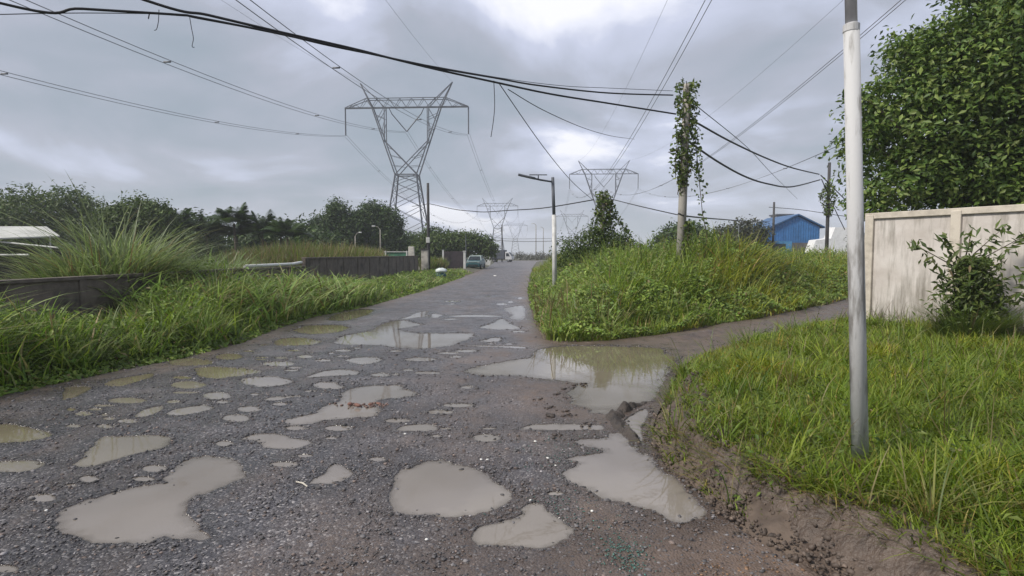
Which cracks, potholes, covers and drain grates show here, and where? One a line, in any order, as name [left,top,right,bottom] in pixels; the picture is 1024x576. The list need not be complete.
pothole [241,433,312,449]
pothole [53,455,247,544]
pothole [478,318,520,330]
pothole [0,423,53,443]
pothole [463,345,678,415]
pothole [284,385,417,426]
pothole [72,434,172,467]
pothole [333,320,475,349]
pothole [470,502,575,549]
pothole [309,463,354,484]
pothole [561,432,708,523]
pothole [240,376,293,387]
